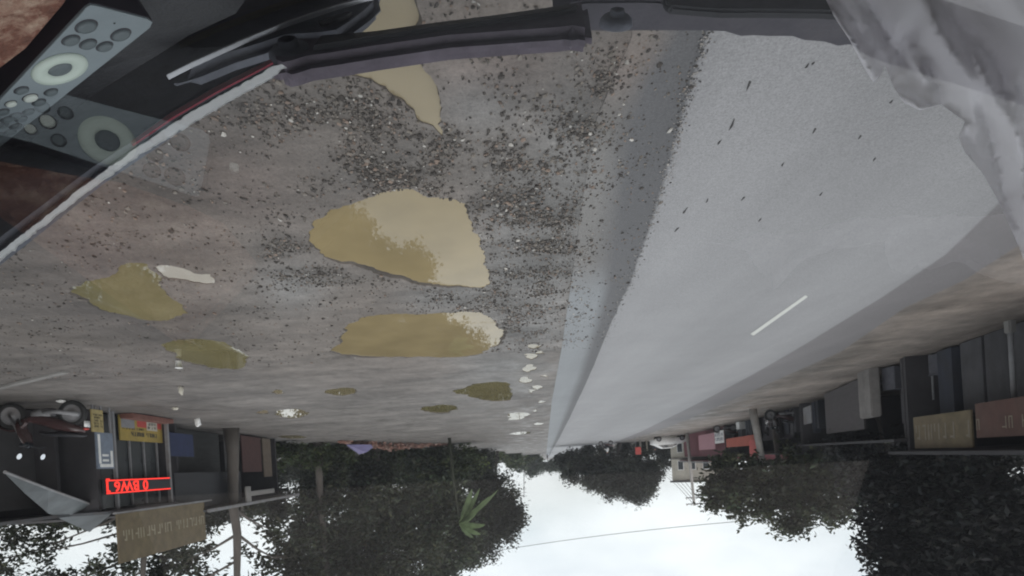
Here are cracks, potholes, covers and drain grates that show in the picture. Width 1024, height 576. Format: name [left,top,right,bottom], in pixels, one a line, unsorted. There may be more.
pothole [161,339,249,369]
pothole [420,405,458,414]
pothole [324,388,358,396]
pothole [351,0,443,136]
pothole [329,312,508,358]
pothole [155,265,215,284]
pothole [68,263,188,321]
pothole [308,189,490,288]
pothole [453,382,513,401]
